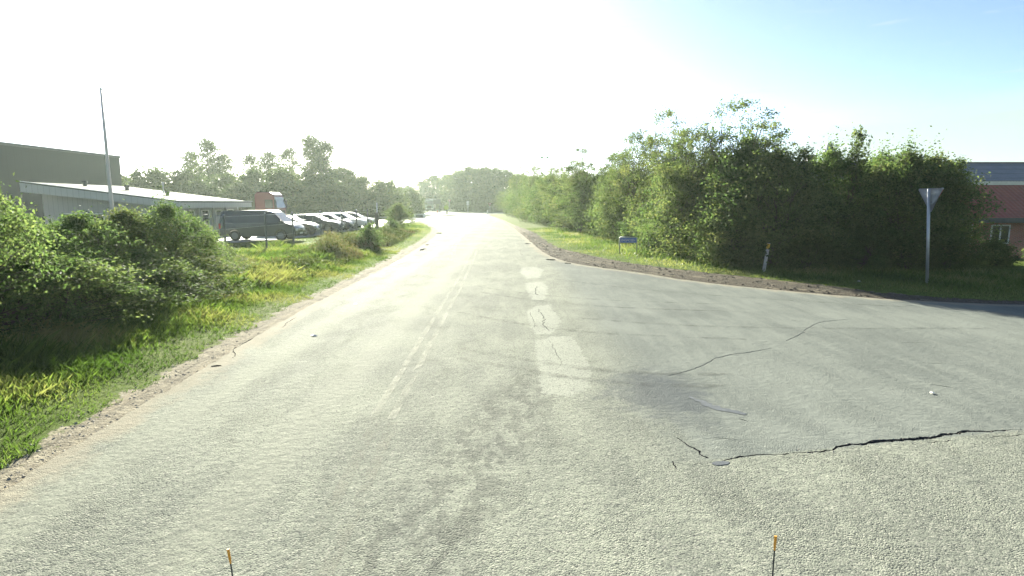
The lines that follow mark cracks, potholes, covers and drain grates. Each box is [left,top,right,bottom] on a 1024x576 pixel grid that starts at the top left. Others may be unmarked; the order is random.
crack [668,319,845,376]
crack [672,427,1022,469]
